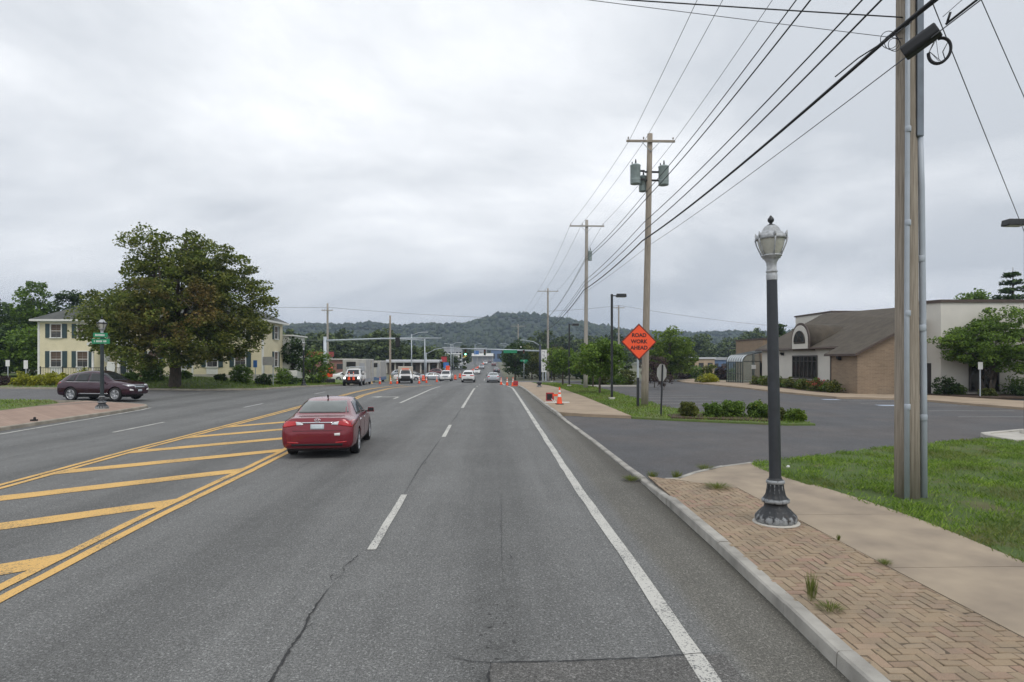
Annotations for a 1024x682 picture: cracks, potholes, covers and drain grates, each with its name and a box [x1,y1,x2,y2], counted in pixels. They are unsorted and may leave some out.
crack [268,551,362,682]
crack [434,651,720,682]
